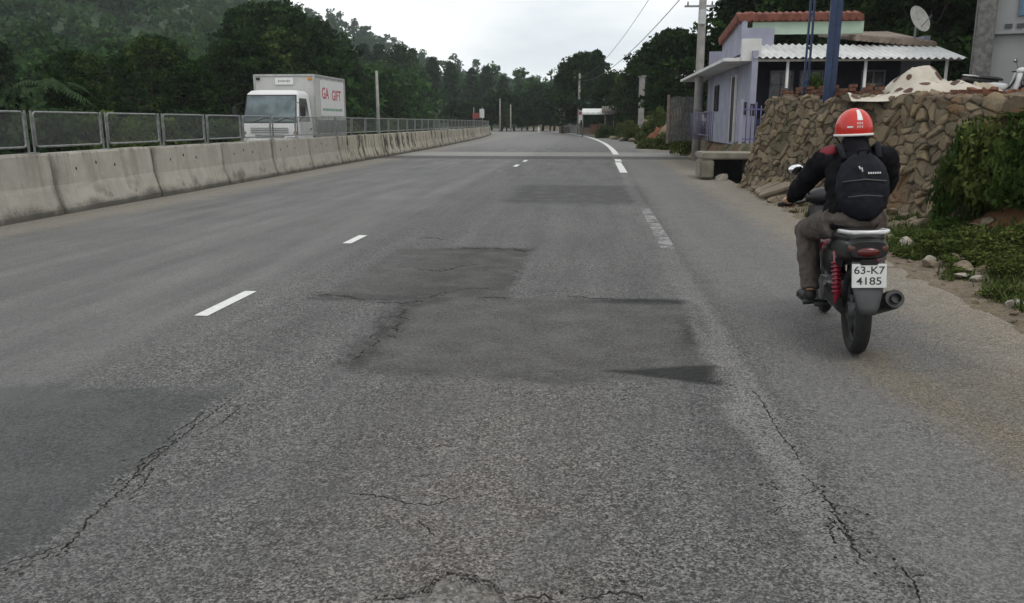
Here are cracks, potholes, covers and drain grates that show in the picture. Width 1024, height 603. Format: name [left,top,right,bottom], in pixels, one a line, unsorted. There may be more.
crack [513,580,647,603]
crack [317,288,505,361]
crack [1,397,250,579]
crack [346,474,466,539]
crack [747,385,931,603]
